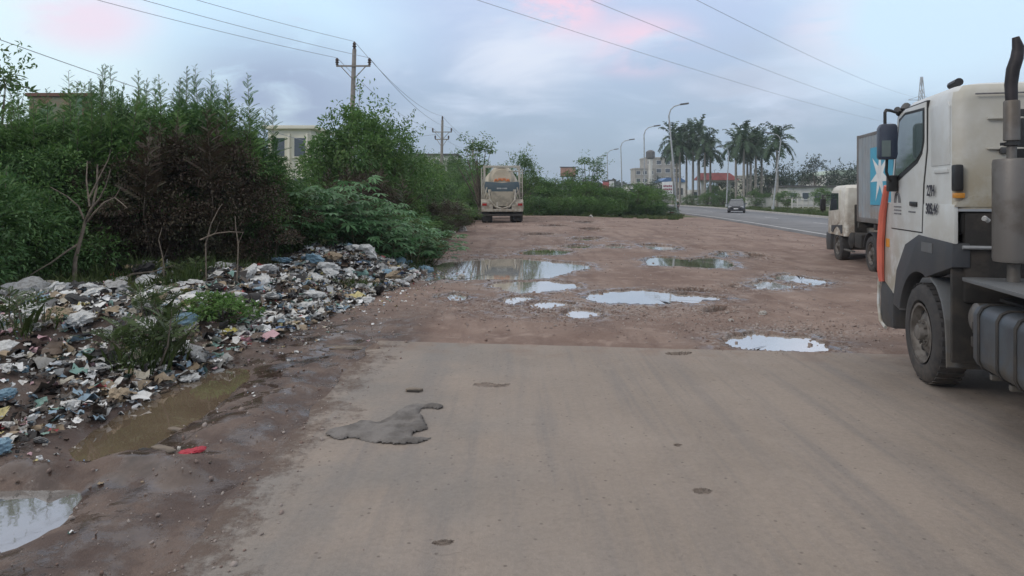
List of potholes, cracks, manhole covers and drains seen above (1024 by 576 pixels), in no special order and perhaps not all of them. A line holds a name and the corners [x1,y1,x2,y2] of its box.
pothole [463,379,519,390]
pothole [489,294,543,307]
pothole [414,257,601,283]
pothole [734,278,812,292]
pothole [573,287,740,308]
pothole [515,299,585,312]
pothole [476,279,592,296]
pothole [637,255,743,270]
pothole [551,305,614,322]
pothole [761,272,841,287]
